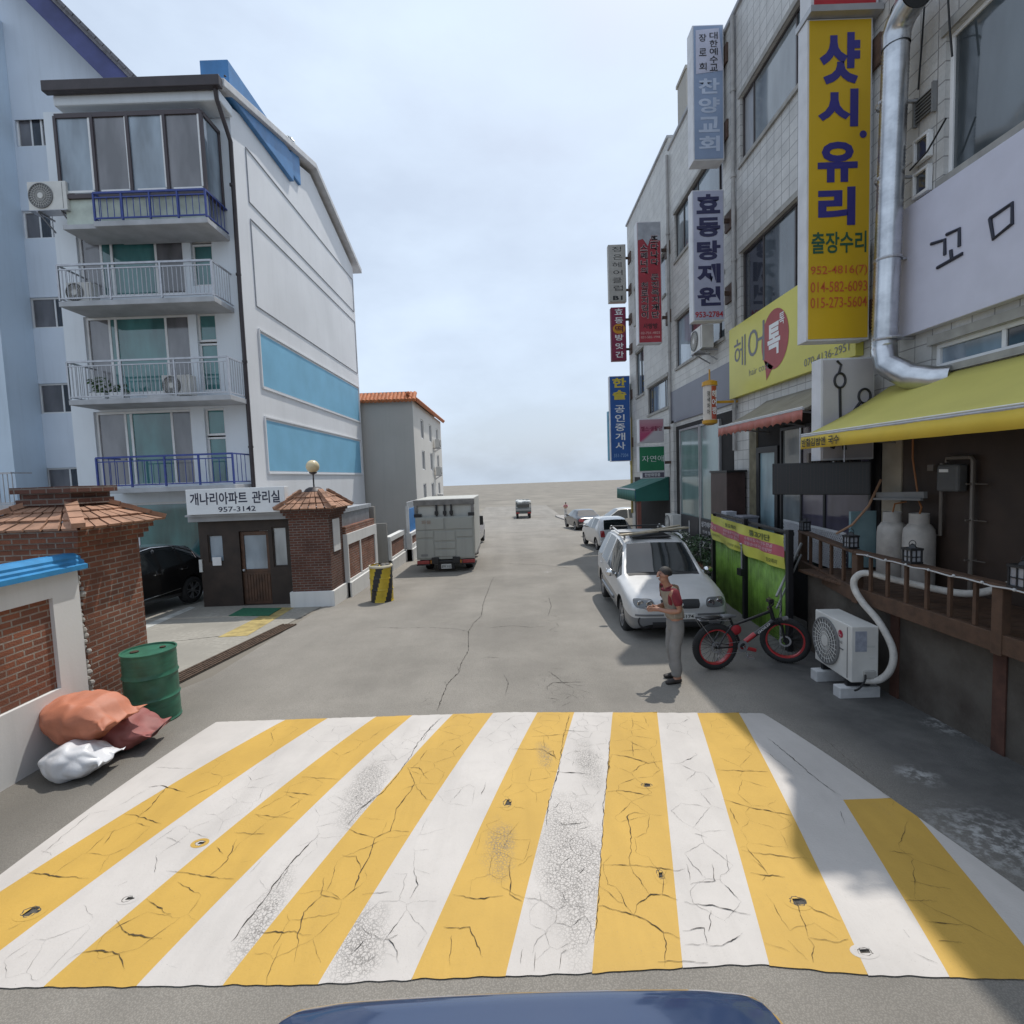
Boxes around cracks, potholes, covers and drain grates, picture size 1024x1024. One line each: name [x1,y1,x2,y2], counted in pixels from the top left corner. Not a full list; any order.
pothole [499,796,516,810]
pothole [850,944,880,959]
pothole [116,894,139,905]
drain grate [179,624,296,683]
pothole [190,838,209,848]
pothole [12,902,50,922]
crack [386,583,524,705]
pothole [653,866,668,884]
pothole [783,892,813,910]
